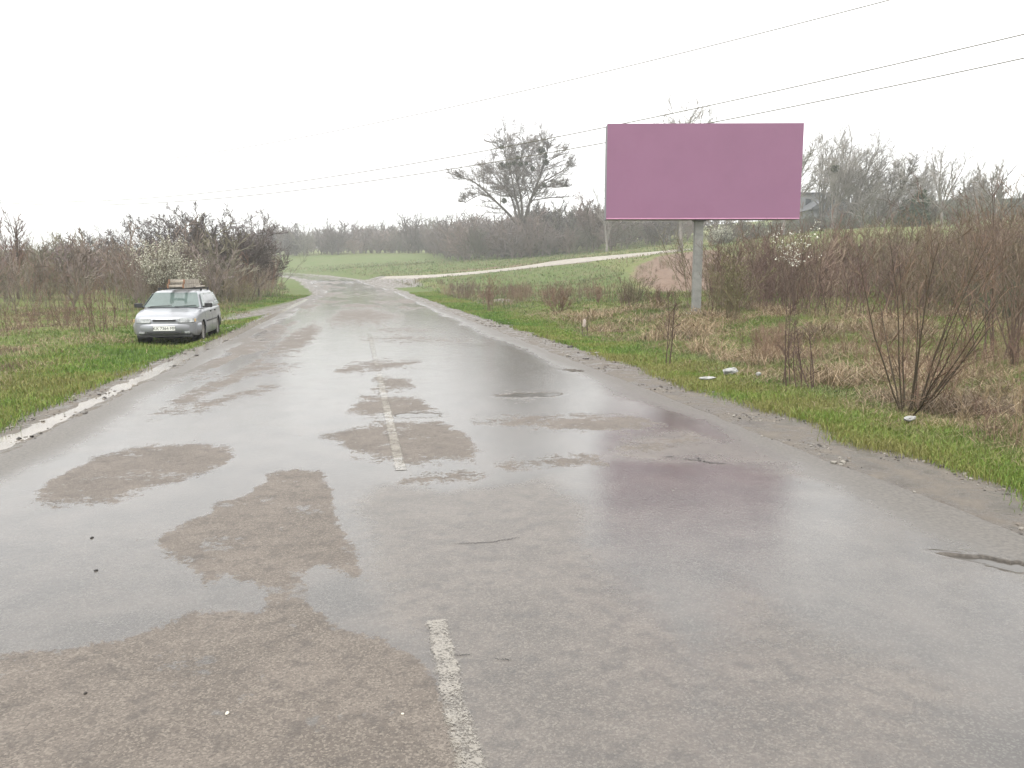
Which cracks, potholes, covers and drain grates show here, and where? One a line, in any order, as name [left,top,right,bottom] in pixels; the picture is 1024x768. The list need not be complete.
pothole [489,391,571,399]
